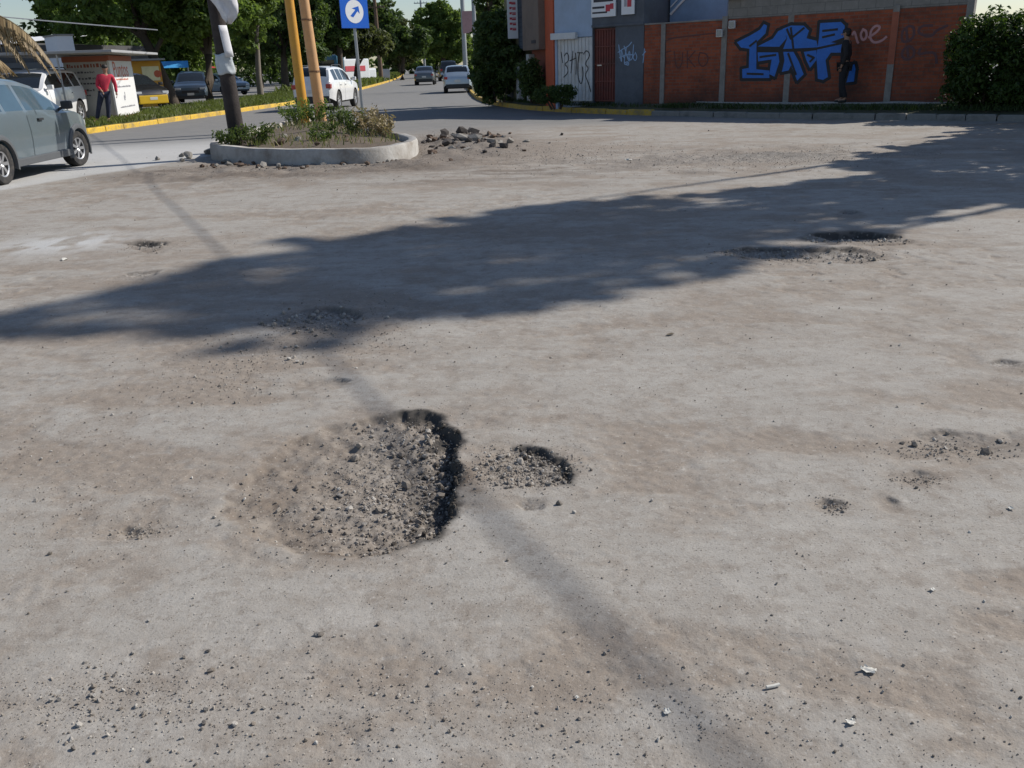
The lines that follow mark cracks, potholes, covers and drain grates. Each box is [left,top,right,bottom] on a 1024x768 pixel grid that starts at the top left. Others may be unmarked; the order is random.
pothole [211,408,469,563]
pothole [461,442,581,493]
pothole [708,246,895,265]
pothole [811,494,857,516]
pothole [792,230,922,247]
pothole [892,425,1024,465]
pothole [93,521,150,552]
pothole [248,304,371,338]
pothole [120,239,173,254]
